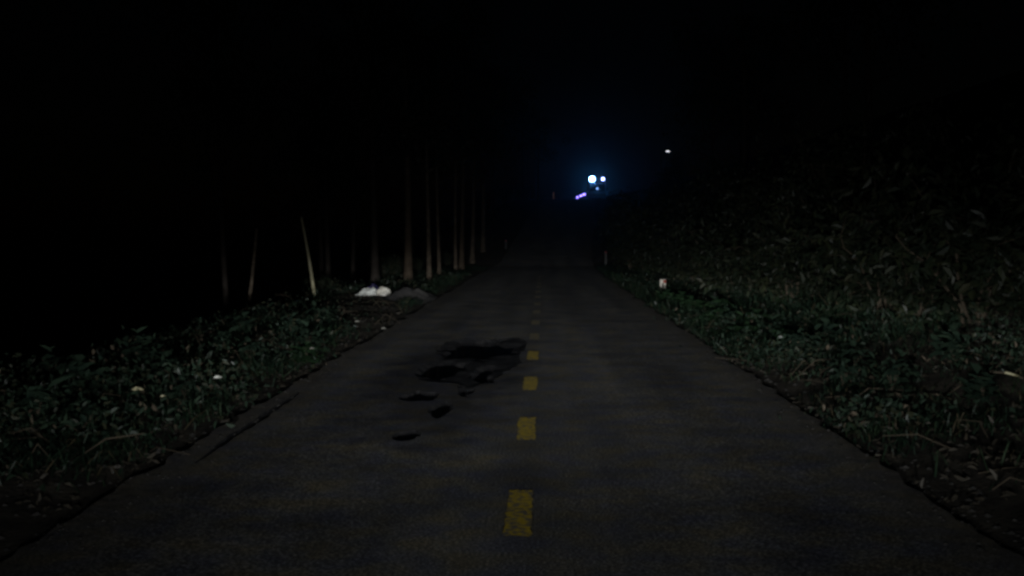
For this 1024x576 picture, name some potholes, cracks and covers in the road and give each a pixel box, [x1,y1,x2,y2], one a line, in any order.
pothole [398,390,439,401]
pothole [391,430,422,441]
pothole [414,337,527,397]
pothole [427,402,454,418]
